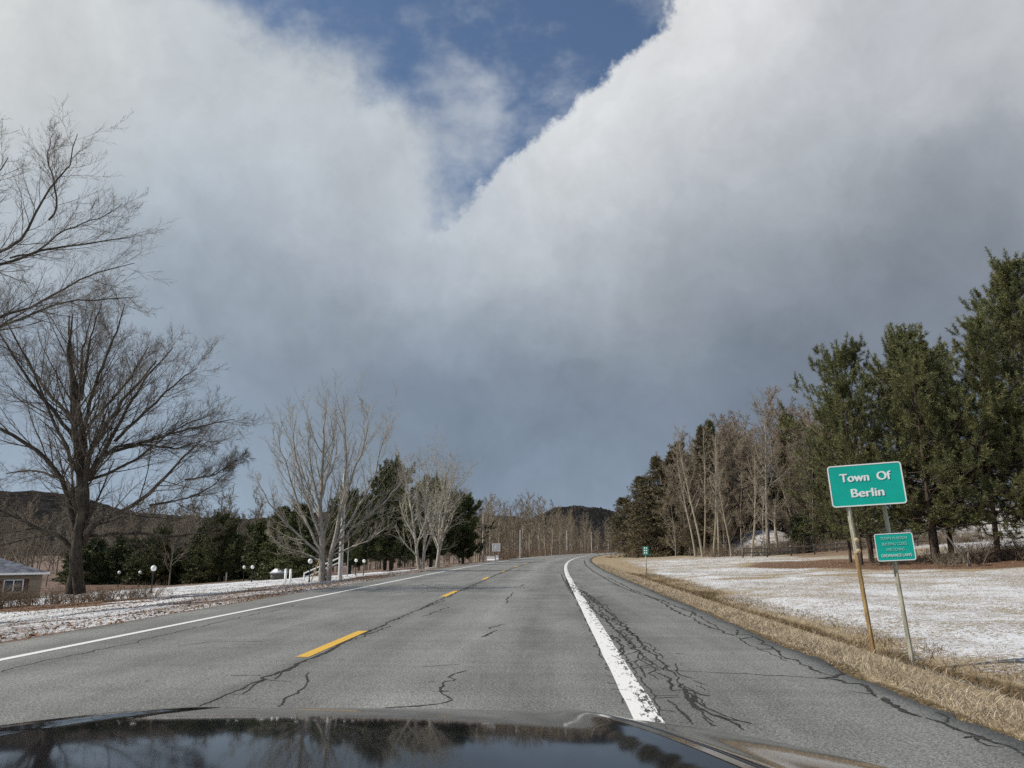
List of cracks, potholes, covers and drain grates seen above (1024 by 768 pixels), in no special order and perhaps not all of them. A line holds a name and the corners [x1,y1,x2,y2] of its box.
crack [561,561,1024,756]
crack [277,672,310,707]
crack [385,664,466,708]
